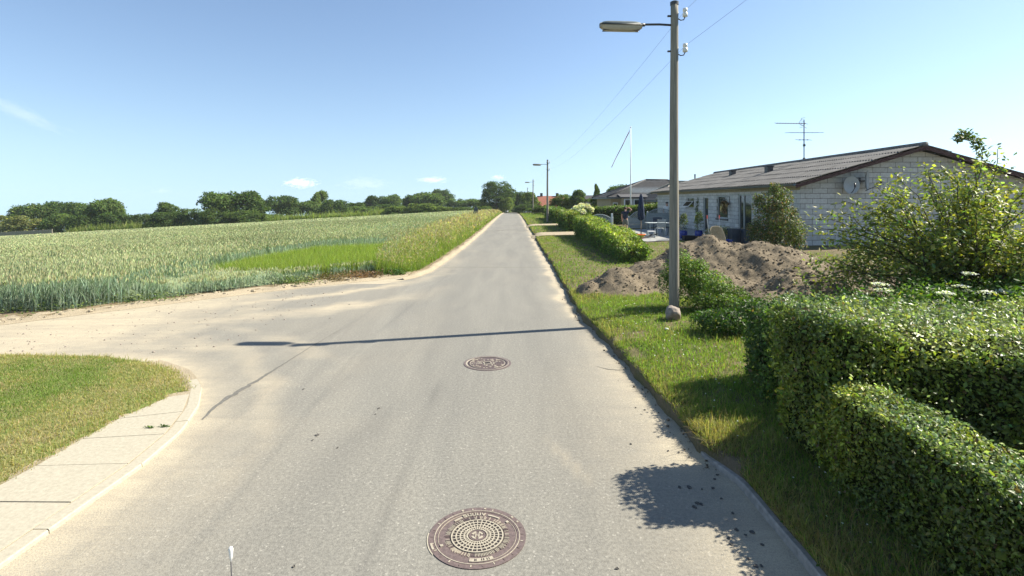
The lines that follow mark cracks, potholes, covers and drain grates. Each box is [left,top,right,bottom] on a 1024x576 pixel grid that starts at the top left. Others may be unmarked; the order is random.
manhole cover [464,356,511,371]
manhole cover [427,507,526,570]
